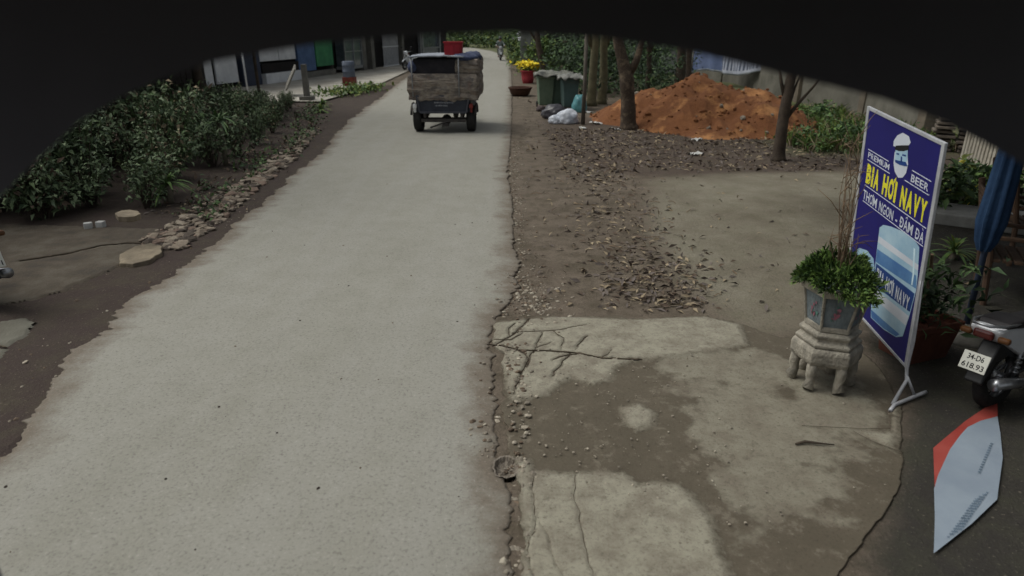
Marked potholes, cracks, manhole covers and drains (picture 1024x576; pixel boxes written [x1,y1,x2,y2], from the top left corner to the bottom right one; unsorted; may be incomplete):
crack [489,319,642,392]
crack [573,477,593,571]
crack [527,469,563,576]
